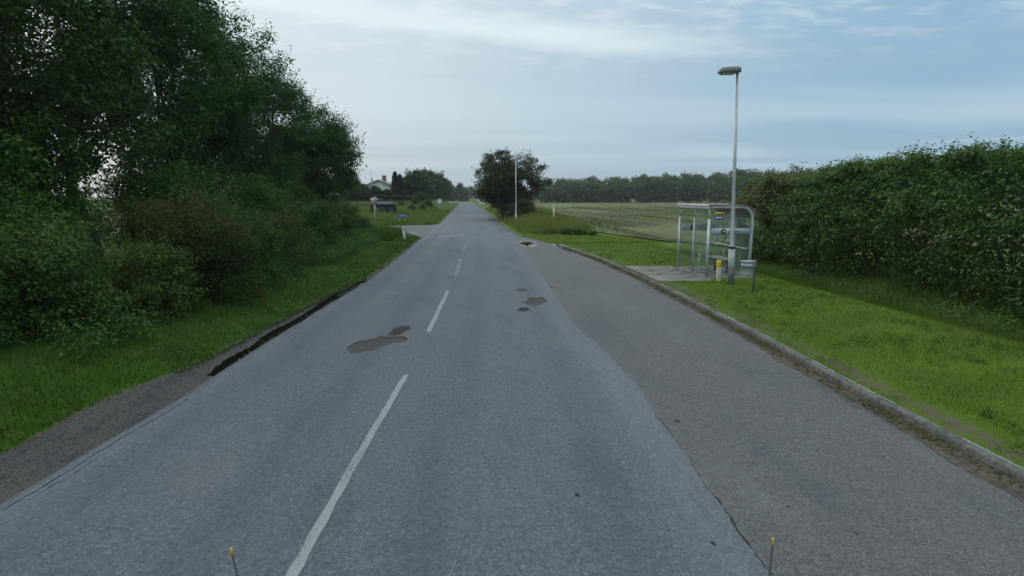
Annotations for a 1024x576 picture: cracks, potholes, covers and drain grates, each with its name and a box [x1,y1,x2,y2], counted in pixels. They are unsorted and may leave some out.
pothole [347,336,408,353]
pothole [523,297,548,306]
pothole [387,326,411,335]
crack [655,414,774,576]
